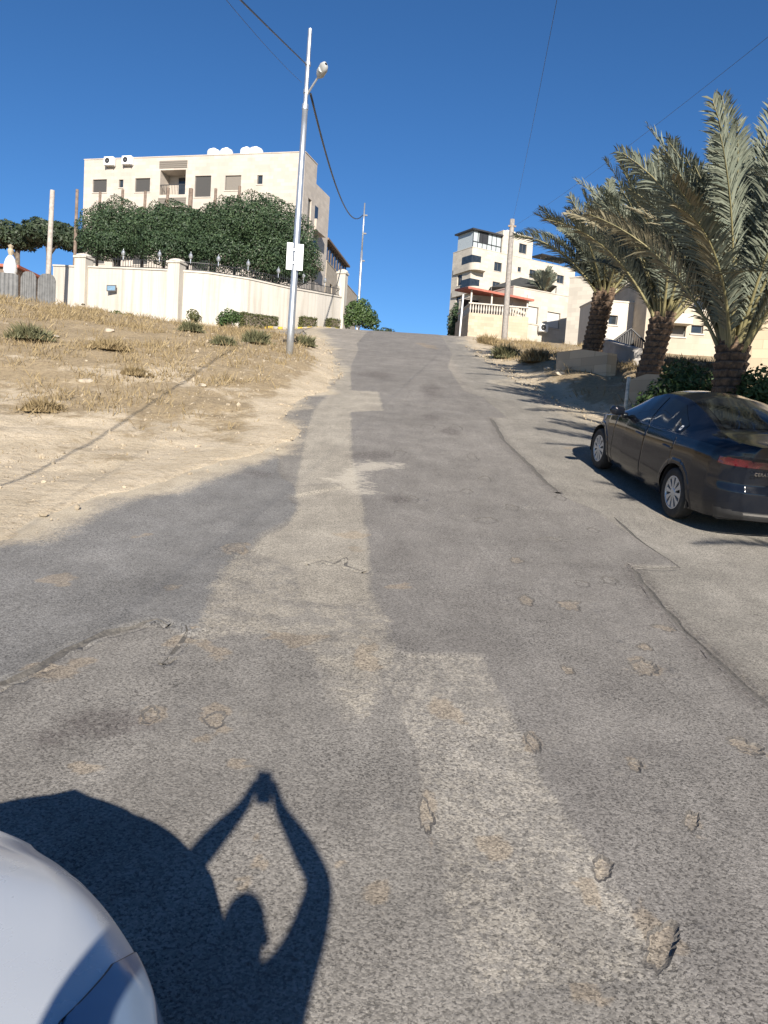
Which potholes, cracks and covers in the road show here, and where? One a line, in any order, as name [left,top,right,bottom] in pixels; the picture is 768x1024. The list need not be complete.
pothole [627,658,660,677]
pothole [554,600,581,612]
pothole [642,918,681,975]
pothole [202,711,228,729]
pothole [626,759,644,773]
pothole [524,730,542,754]
pothole [724,736,766,756]
pothole [141,705,161,724]
pothole [591,854,615,883]
crack [0,617,192,692]
pothole [417,795,436,835]
pothole [681,810,700,835]
